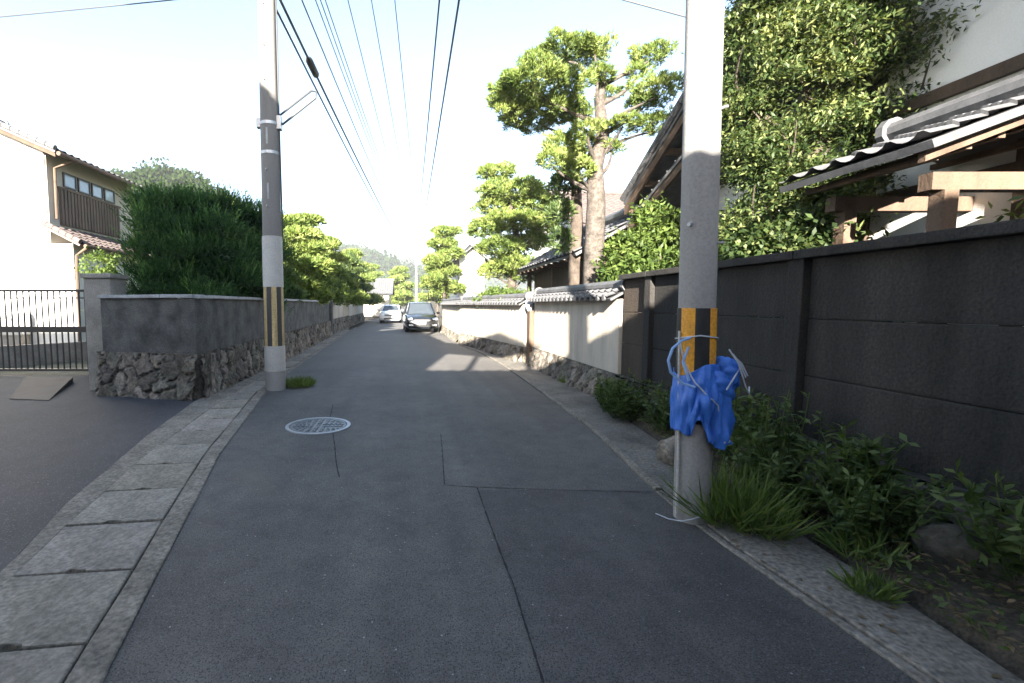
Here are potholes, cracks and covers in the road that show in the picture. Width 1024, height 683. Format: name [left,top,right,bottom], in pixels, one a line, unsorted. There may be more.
manhole cover [285,417,351,435]
